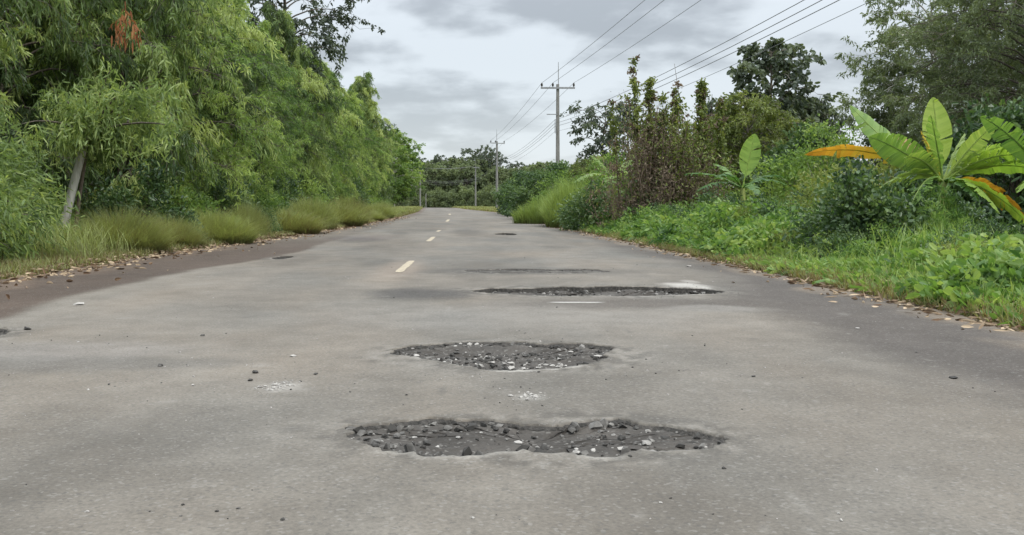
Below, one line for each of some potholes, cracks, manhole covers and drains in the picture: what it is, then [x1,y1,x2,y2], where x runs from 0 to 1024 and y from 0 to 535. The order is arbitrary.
pothole [383,340,623,373]
pothole [468,285,730,297]
pothole [332,415,742,461]
